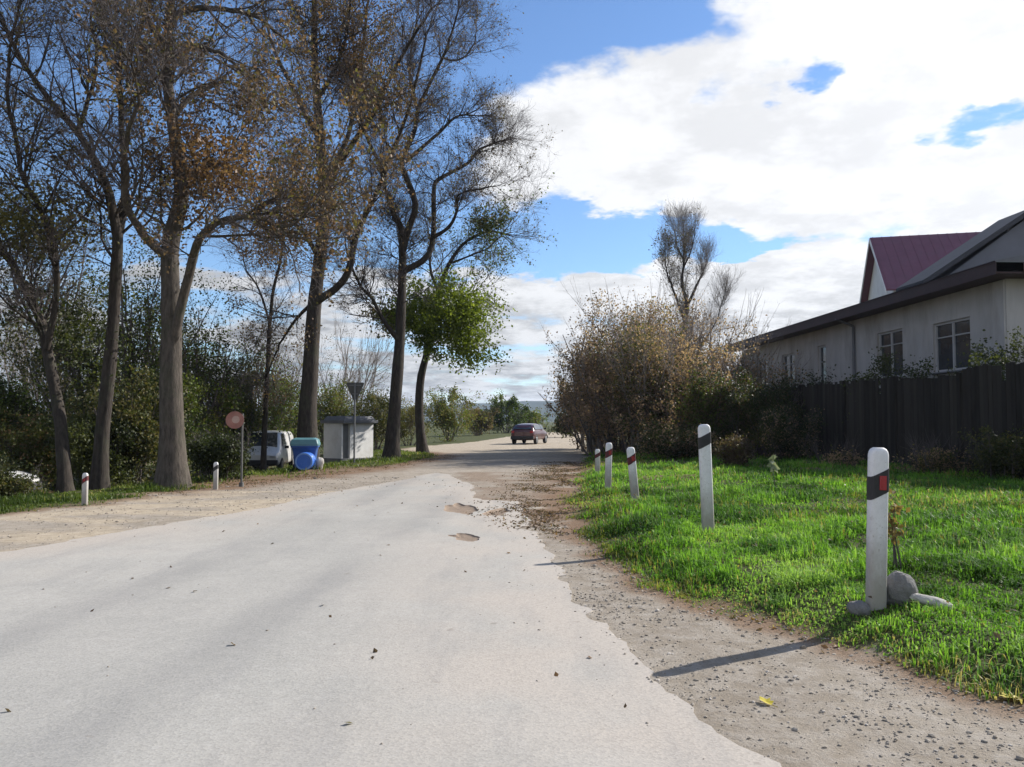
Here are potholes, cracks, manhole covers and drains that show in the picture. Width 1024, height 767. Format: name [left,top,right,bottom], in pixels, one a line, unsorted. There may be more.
pothole [448,533,480,542]
pothole [444,503,478,515]
